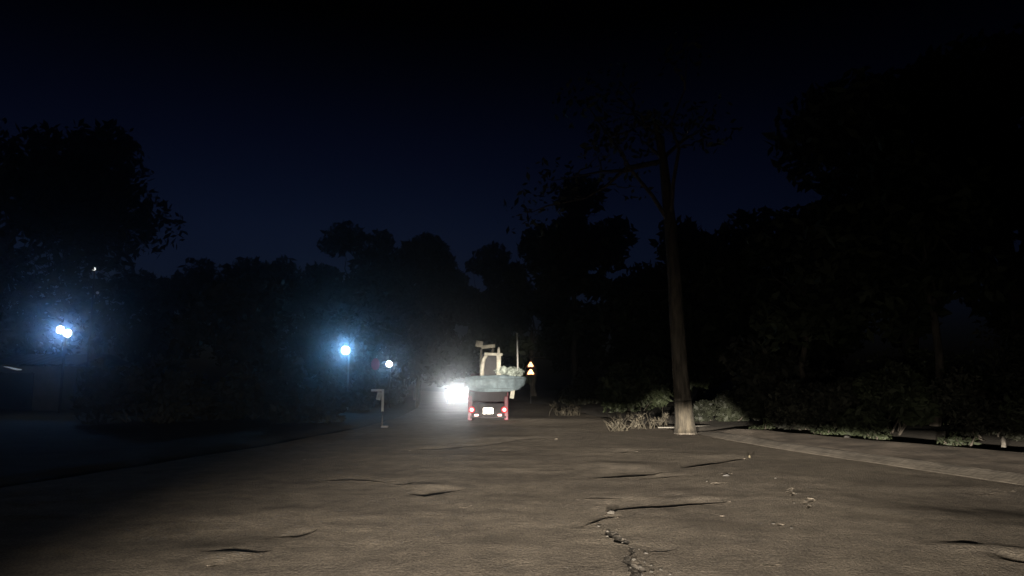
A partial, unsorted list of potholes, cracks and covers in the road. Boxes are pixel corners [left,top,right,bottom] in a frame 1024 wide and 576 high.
crack [577,499,731,576]
